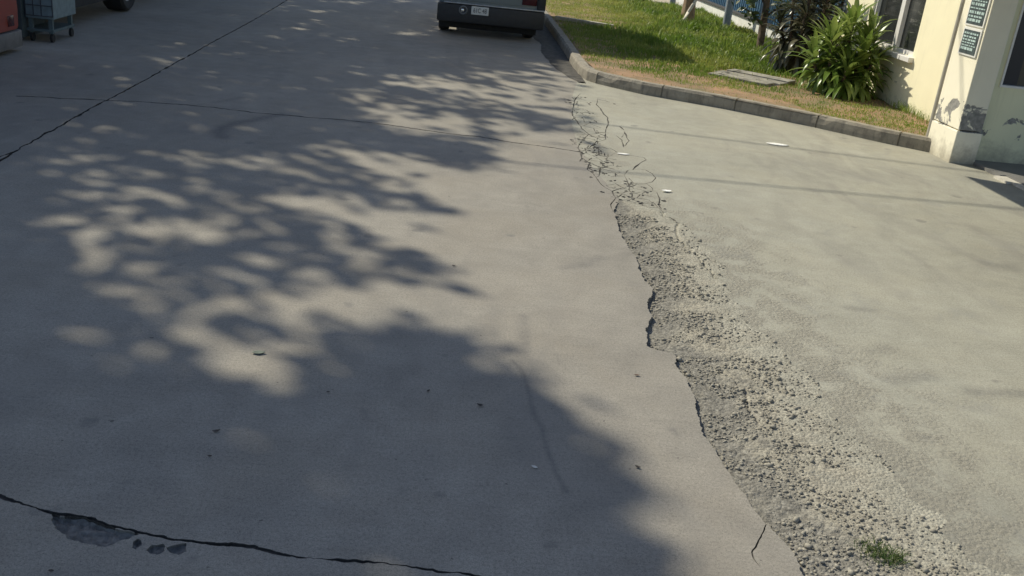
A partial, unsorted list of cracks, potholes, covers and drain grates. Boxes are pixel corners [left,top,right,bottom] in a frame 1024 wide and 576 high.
crack [563,94,1011,576]
pothole [51,514,139,547]
crack [0,494,480,576]
pothole [147,544,165,555]
pothole [167,543,186,555]
